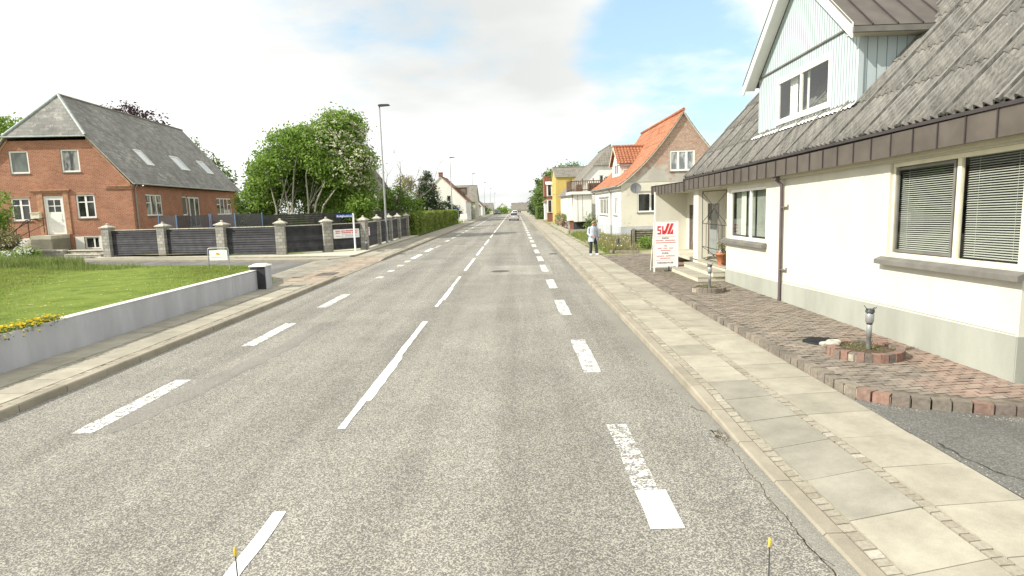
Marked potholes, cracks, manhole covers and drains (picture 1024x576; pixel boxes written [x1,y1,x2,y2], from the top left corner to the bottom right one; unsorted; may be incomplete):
crack [713,429,838,576]
crack [938,442,1018,478]
